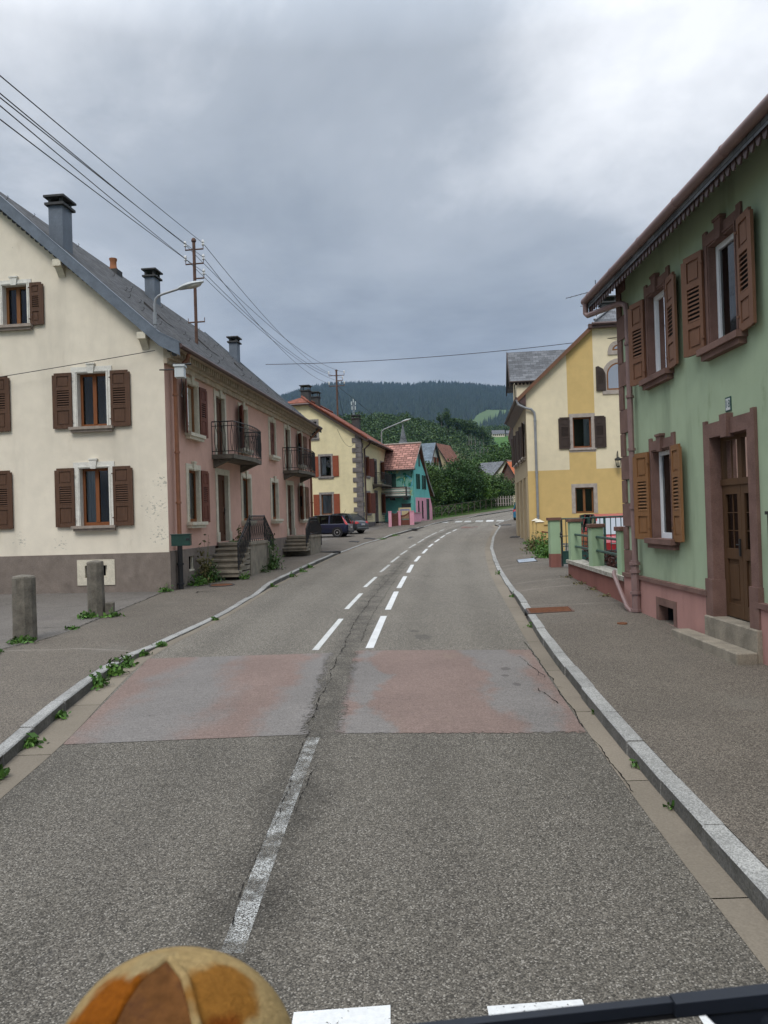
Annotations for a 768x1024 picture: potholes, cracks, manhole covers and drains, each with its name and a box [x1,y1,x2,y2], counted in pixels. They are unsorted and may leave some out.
crack [519,642,632,791]
manhole cover [526,606,575,614]
